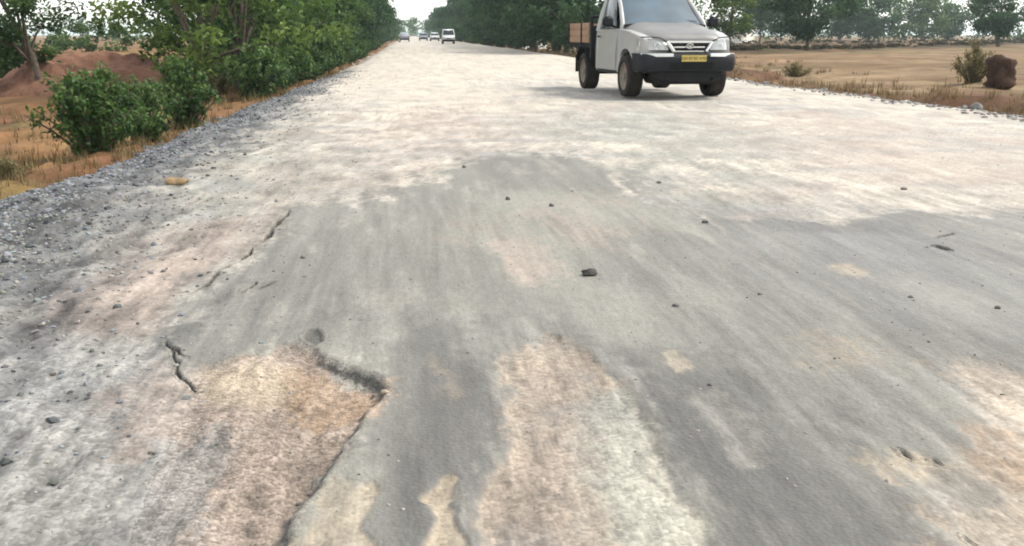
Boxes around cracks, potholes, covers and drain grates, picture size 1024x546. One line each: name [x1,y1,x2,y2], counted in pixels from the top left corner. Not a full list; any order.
crack [159,333,200,395]
pothole [298,327,328,346]
crack [190,208,293,295]
pothole [130,341,395,546]
